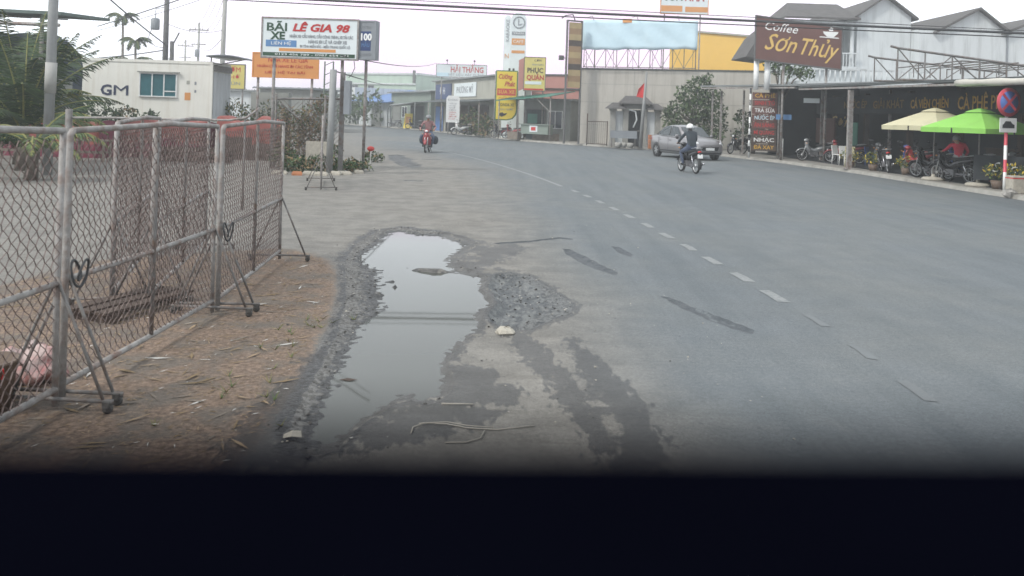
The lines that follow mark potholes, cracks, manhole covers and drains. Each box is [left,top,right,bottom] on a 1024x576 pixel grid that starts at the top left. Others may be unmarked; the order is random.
pothole [291,227,493,427]
pothole [487,272,574,330]
